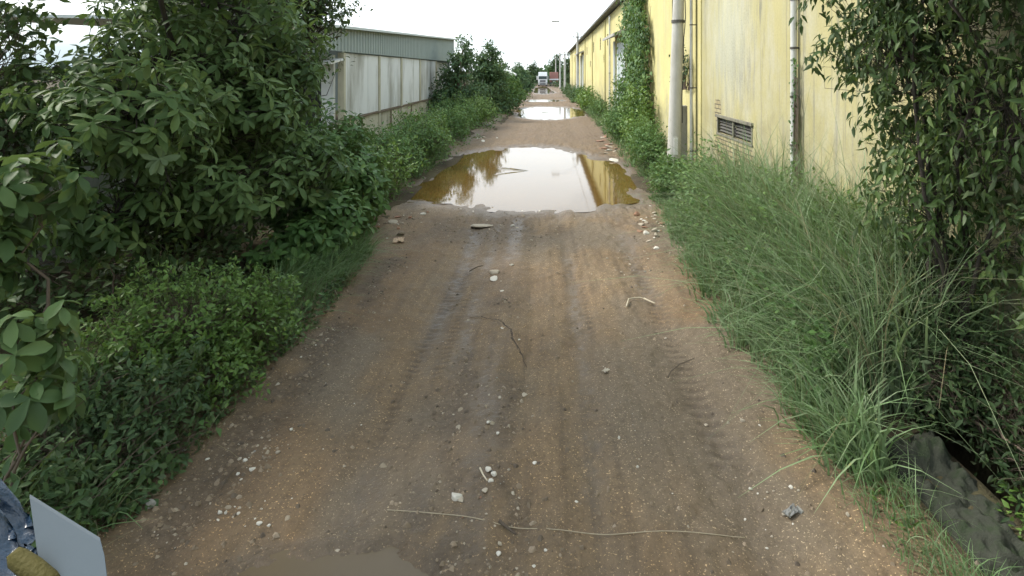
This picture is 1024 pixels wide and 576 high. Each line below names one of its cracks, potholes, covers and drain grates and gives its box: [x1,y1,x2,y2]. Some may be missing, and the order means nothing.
pothole [223,536,444,576]
pothole [514,106,588,120]
pothole [401,145,648,217]
